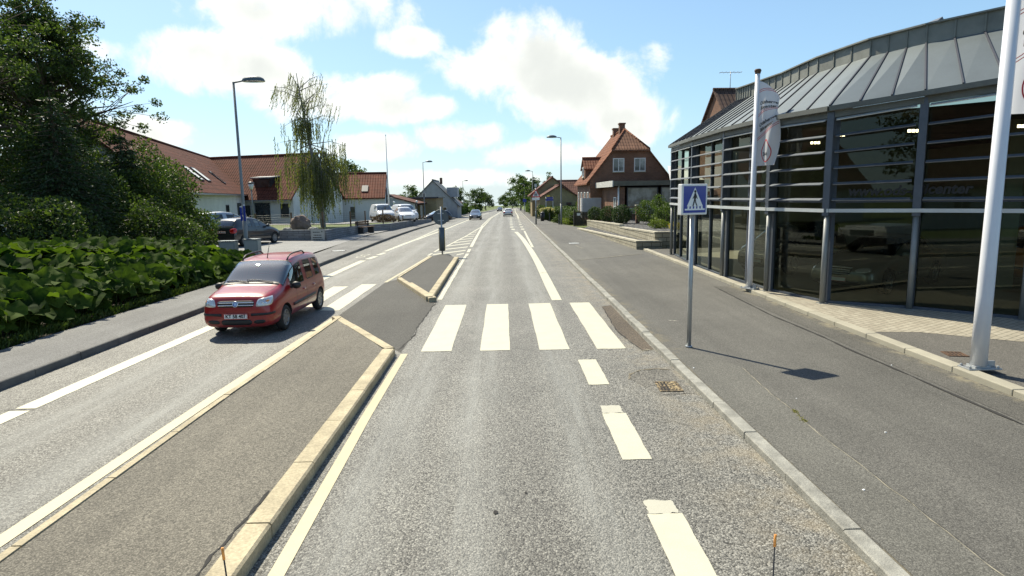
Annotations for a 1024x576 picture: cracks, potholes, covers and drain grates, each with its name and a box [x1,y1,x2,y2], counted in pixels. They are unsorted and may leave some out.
drain grate [654,381,684,392]
